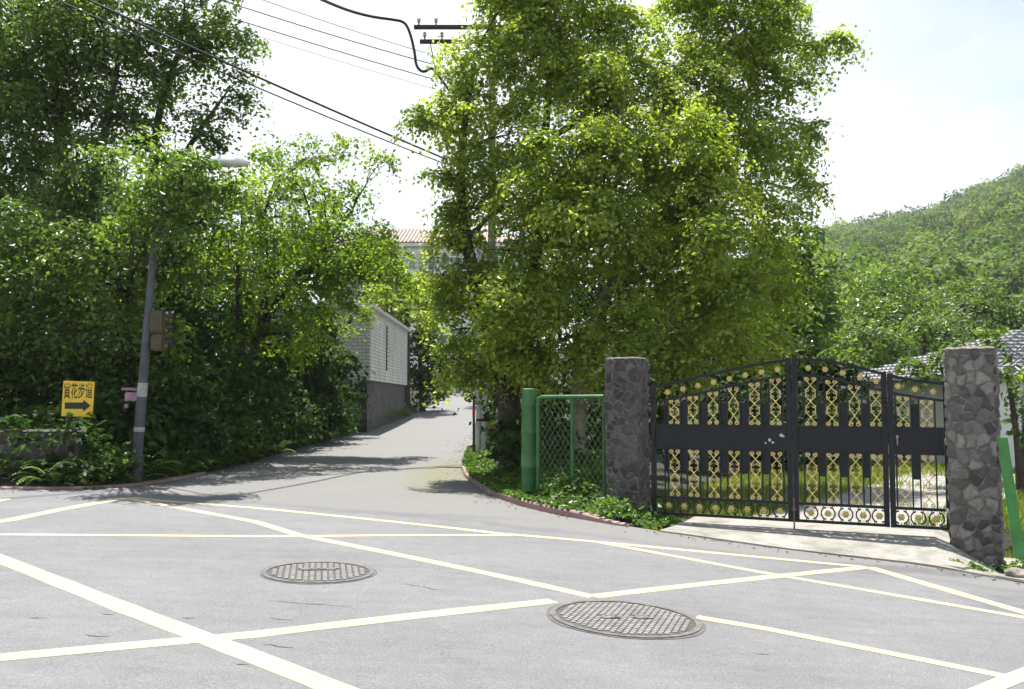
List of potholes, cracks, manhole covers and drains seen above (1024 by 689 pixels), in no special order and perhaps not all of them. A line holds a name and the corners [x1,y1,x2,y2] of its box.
manhole cover [260,561,377,585]
manhole cover [547,600,706,640]
